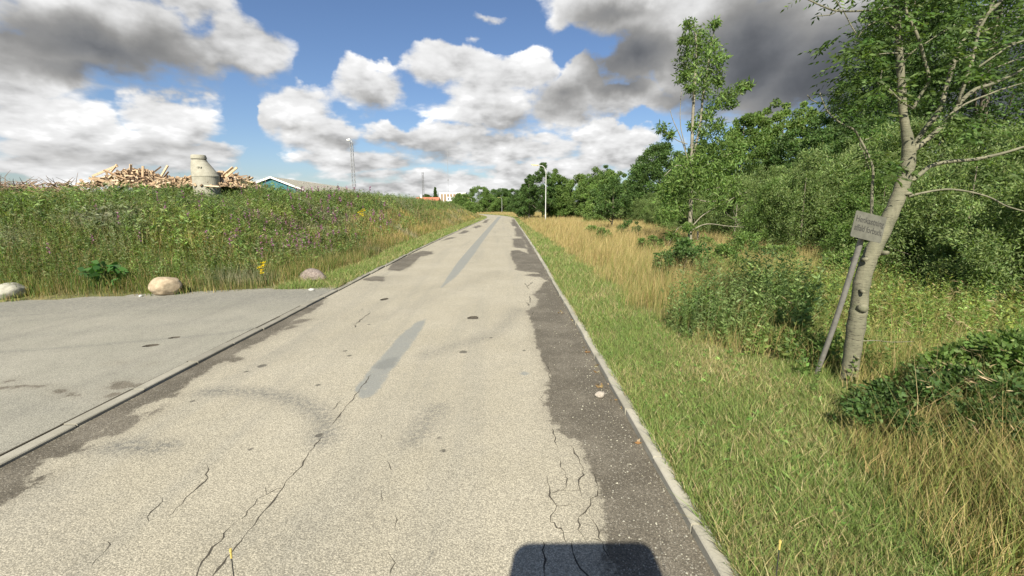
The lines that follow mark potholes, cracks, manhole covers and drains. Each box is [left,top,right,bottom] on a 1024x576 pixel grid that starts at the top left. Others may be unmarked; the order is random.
crack [147,466,209,521]
crack [542,429,609,576]
crack [196,377,369,576]
